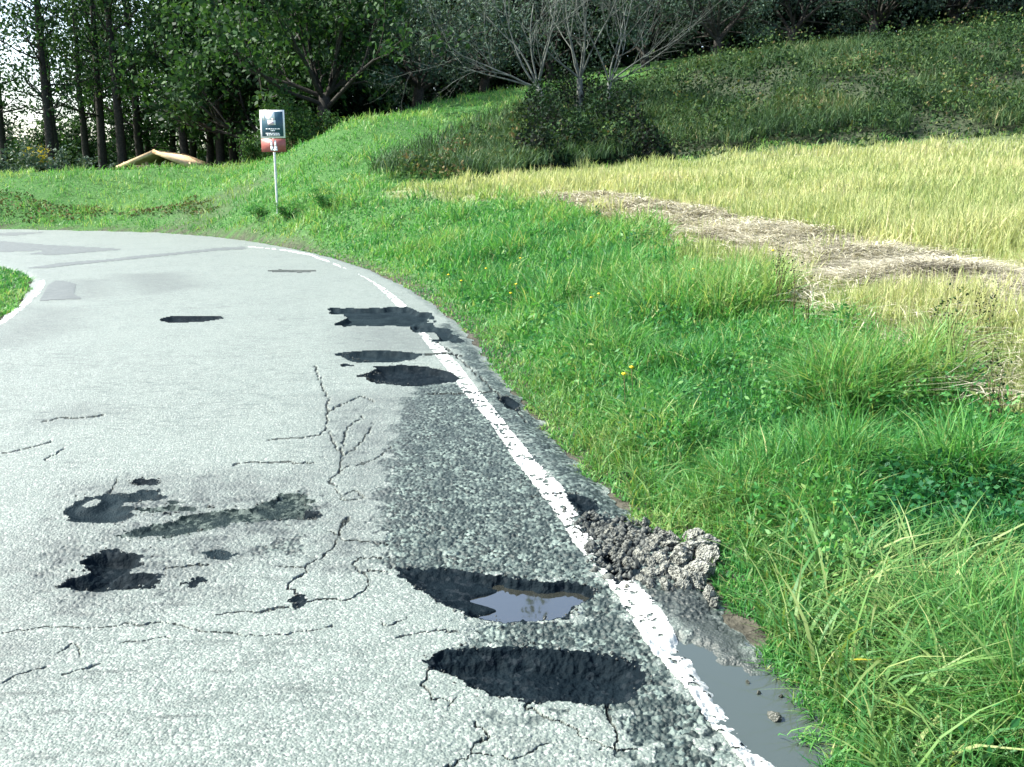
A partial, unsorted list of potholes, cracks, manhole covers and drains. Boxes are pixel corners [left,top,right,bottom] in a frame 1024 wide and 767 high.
pothole [422,645,647,708]
crack [419,672,549,767]
pothole [327,307,437,332]
pothole [340,363,460,387]
crack [2,366,391,683]
pothole [63,488,167,524]
crack [381,620,459,638]
pothole [335,350,422,363]
pothole [114,493,316,540]
pothole [129,478,160,486]
pothole [395,565,598,625]
pothole [56,548,164,592]
